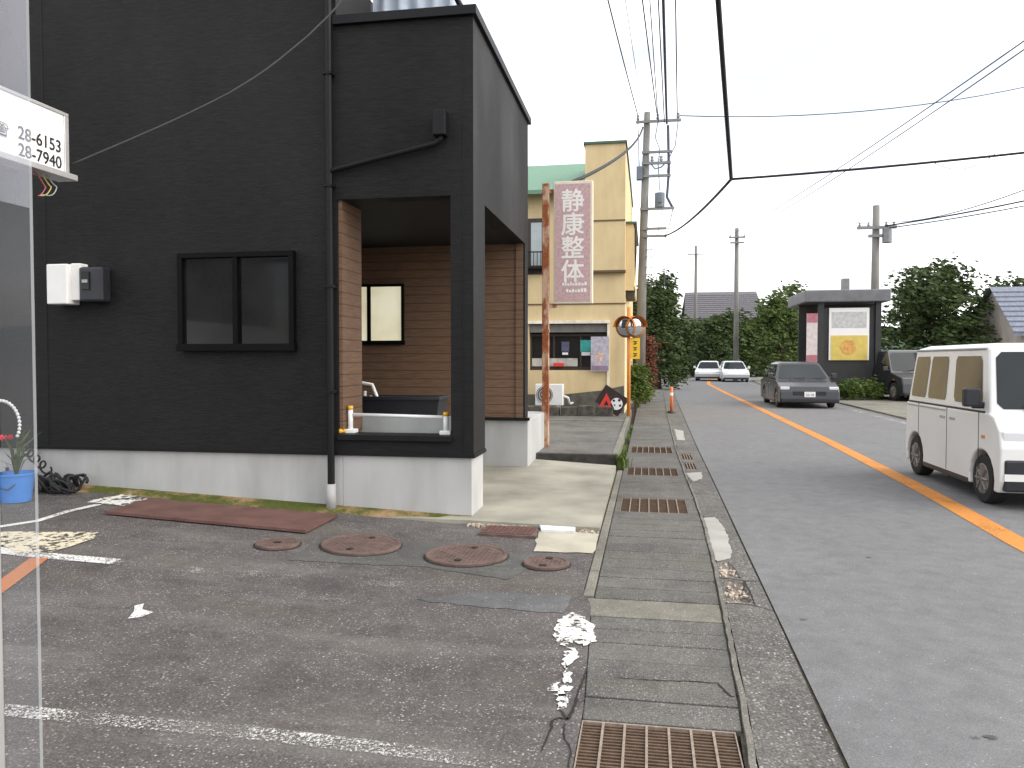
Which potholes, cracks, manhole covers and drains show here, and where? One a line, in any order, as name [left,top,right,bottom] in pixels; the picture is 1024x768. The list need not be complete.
crack [541,668,587,767]
drain grate [574,720,744,768]
manhole cover [423,544,509,567]
crack [616,677,735,697]
manhole cover [521,556,571,571]
drain grate [628,446,676,454]
manhole cover [319,533,403,556]
drain grate [623,467,684,476]
pothole [719,562,742,579]
drain grate [614,497,698,514]
pothole [725,579,752,603]
